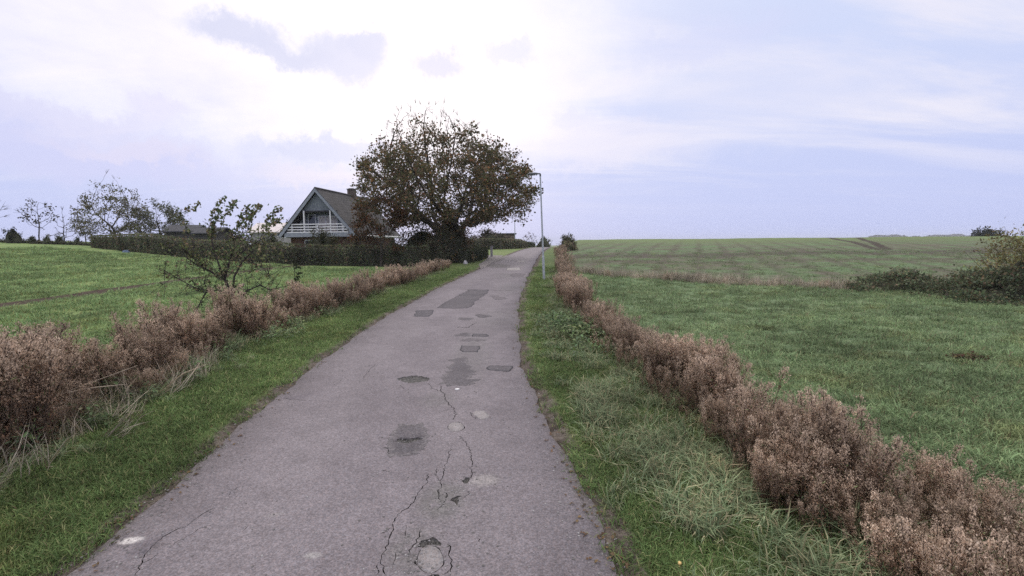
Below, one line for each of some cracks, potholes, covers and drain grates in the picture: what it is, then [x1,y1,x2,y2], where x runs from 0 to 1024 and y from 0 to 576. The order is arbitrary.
crack [376,436,473,574]
crack [135,509,211,575]
